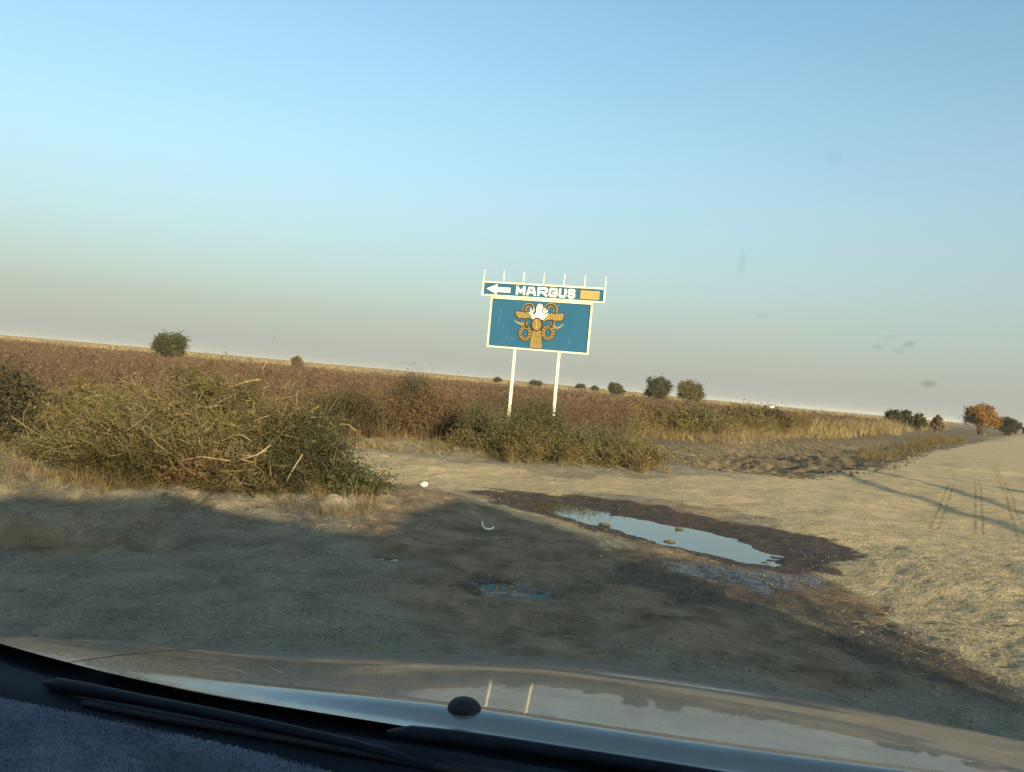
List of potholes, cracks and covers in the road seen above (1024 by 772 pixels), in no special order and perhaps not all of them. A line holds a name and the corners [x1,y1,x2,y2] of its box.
pothole [452,568,576,605]
pothole [481,490,831,572]
